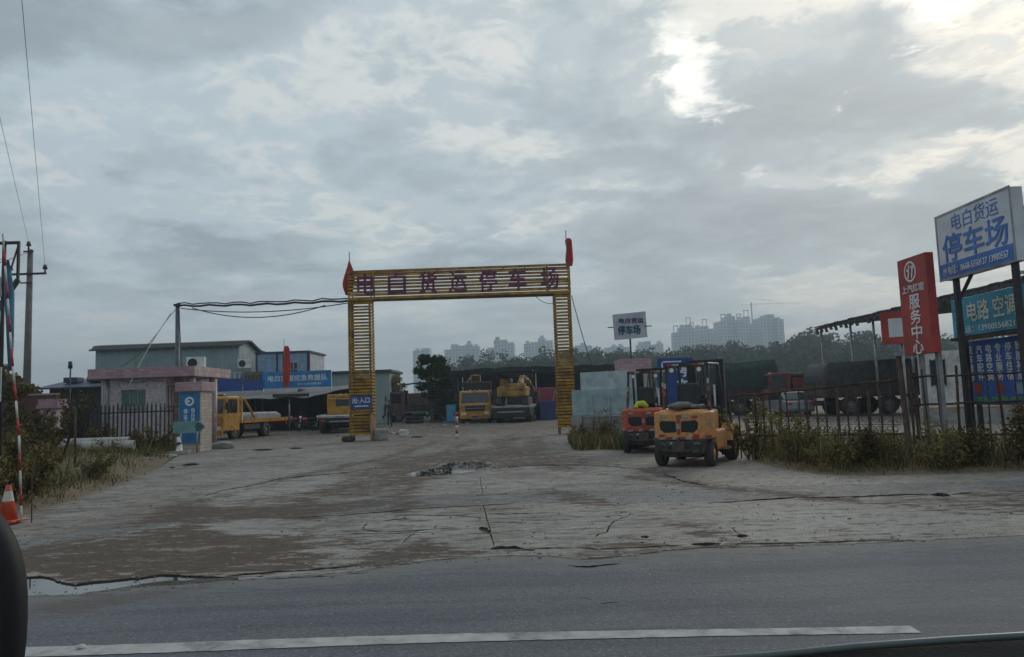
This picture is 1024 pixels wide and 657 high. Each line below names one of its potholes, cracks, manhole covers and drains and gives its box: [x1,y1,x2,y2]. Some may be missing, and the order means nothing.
pothole [403,460,496,476]
crack [203,468,376,497]
crack [531,513,679,568]
crack [664,474,972,503]
crack [300,503,530,544]
